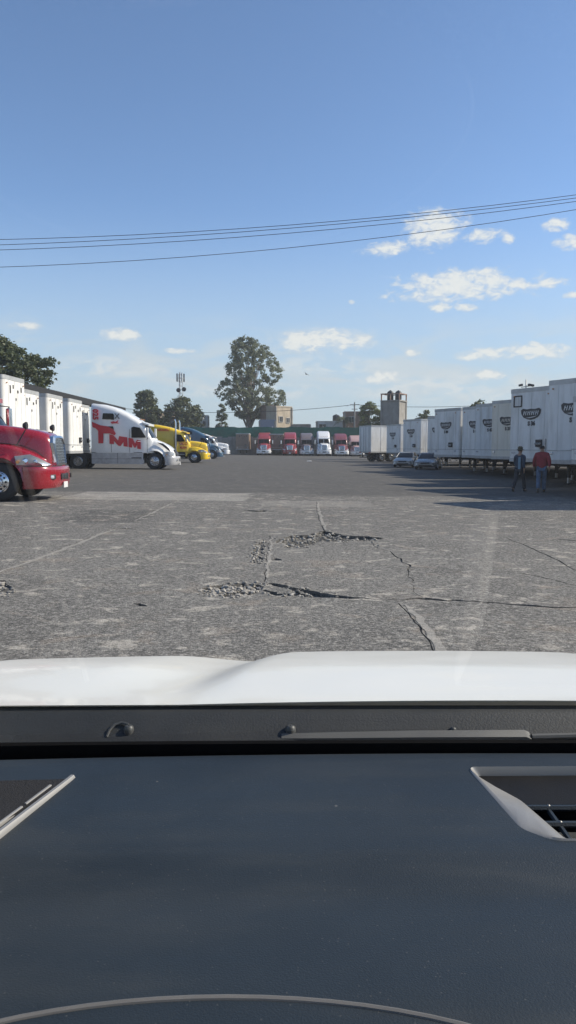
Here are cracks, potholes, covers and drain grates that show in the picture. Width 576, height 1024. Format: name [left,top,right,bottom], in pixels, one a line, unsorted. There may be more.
pothole [0,580,17,597]
pothole [274,530,383,549]
pothole [193,581,271,598]
crack [251,543,576,608]
